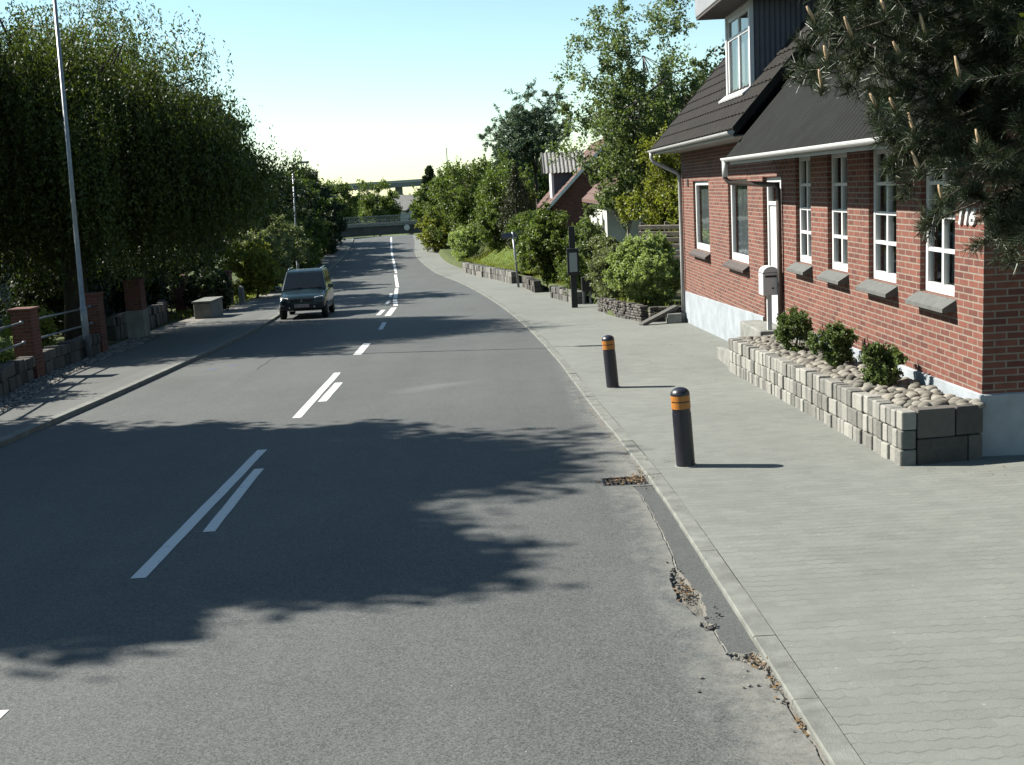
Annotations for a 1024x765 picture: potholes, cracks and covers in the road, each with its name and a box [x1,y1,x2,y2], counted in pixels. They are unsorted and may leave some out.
crack [807,735,827,765]
crack [631,486,676,567]
pothole [669,567,708,617]
drain grate [600,476,649,486]
